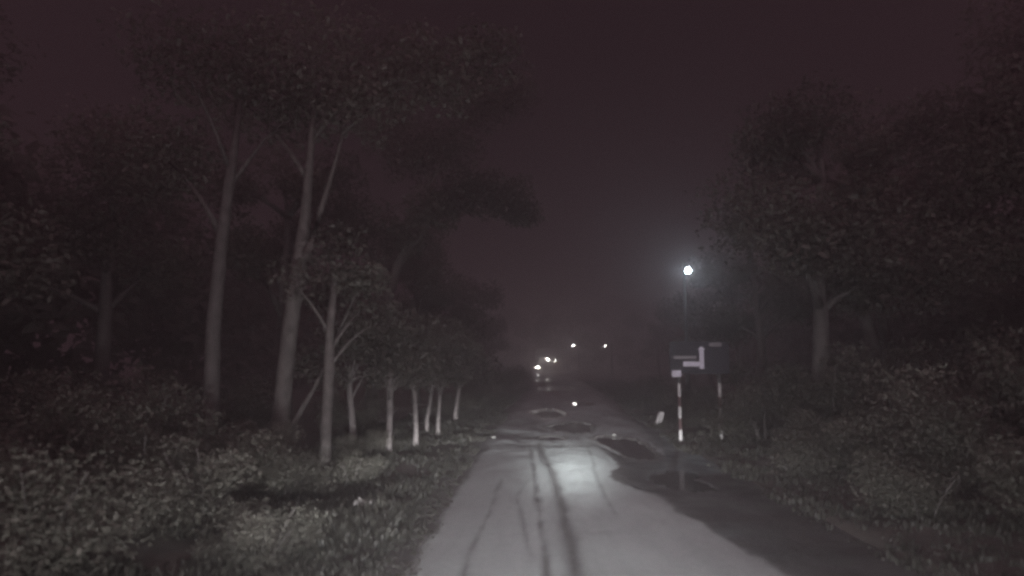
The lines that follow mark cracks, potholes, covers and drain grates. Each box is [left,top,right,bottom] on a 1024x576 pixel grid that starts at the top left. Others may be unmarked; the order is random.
pothole [540,421,598,435]
pothole [529,408,570,420]
pothole [588,435,665,463]
